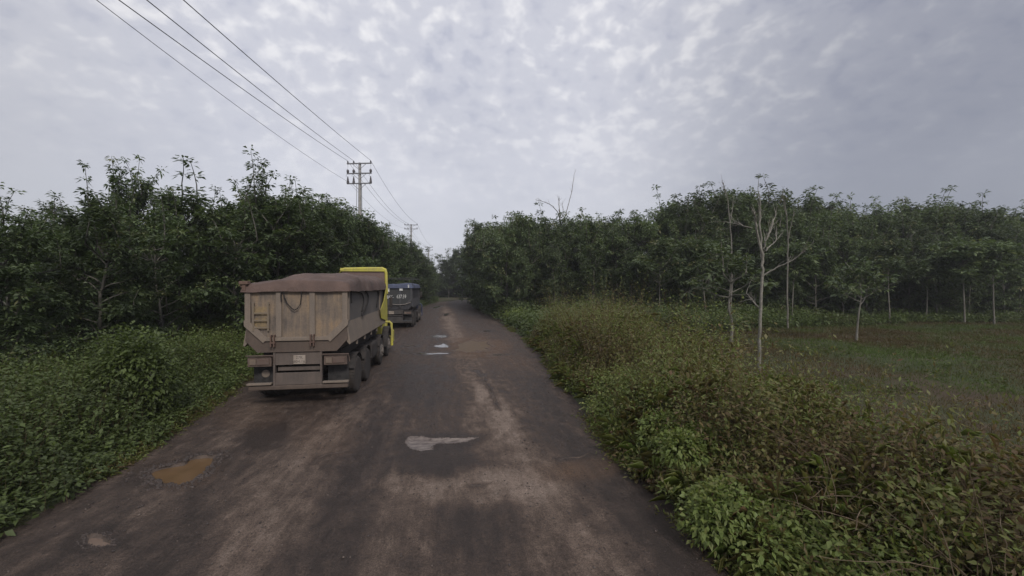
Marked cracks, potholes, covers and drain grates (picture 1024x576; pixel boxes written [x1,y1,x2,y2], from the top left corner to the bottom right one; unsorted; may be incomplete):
pothole [125,450,234,492]
pothole [76,530,119,550]
